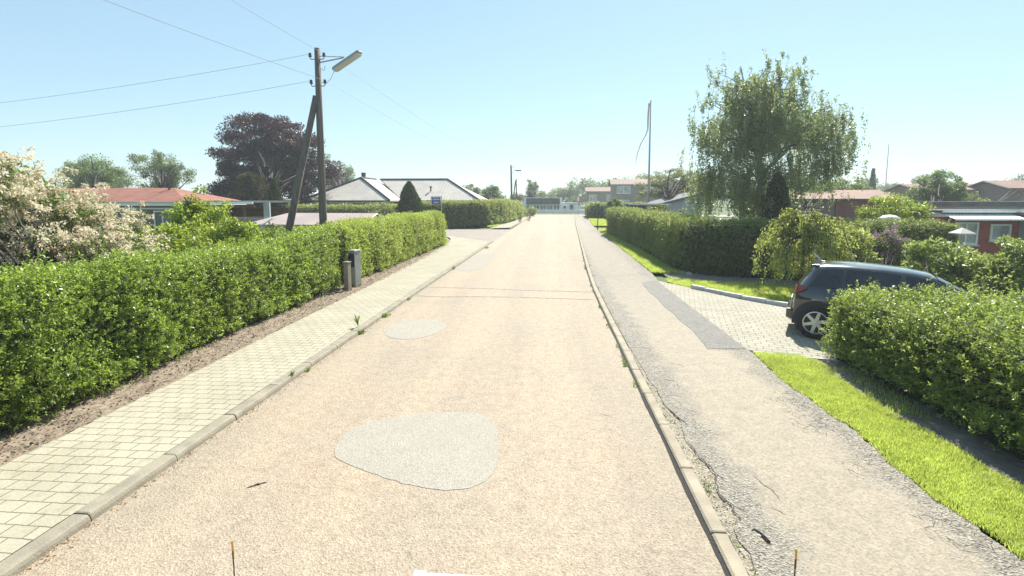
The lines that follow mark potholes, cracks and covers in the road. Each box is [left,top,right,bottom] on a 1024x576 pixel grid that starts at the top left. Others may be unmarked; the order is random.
crack [687,441,786,517]
